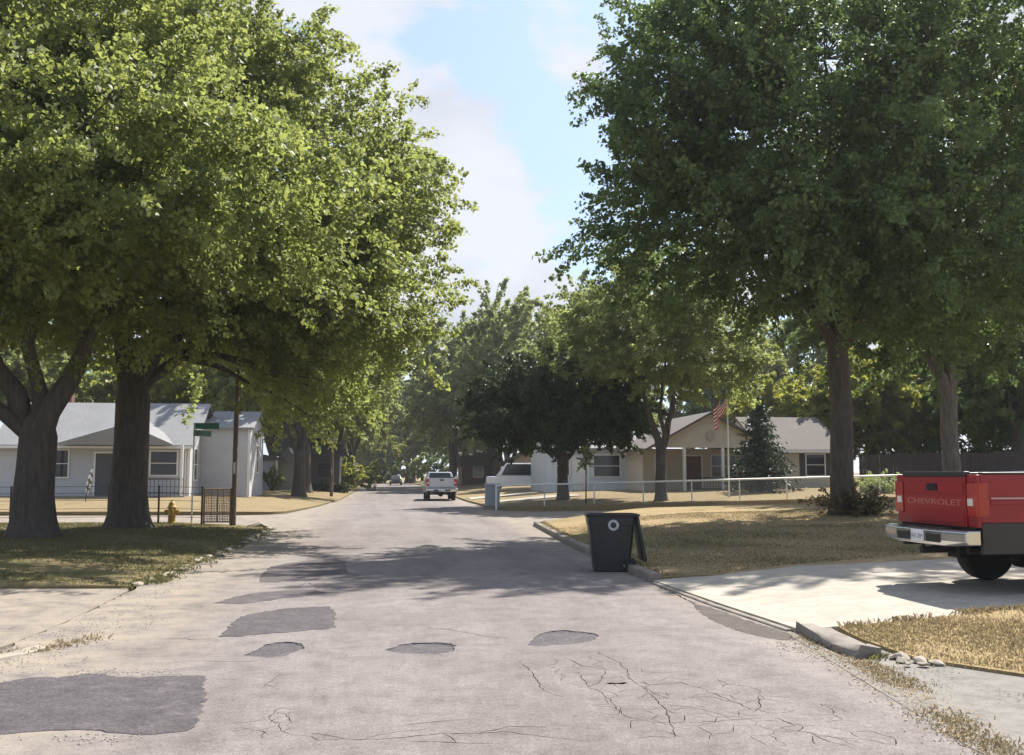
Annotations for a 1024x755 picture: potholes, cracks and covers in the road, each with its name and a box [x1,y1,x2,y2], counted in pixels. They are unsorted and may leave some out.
crack [507,653,897,749]
pothole [386,642,456,654]
pothole [245,642,305,658]
crack [230,707,580,744]
pothole [528,630,599,646]
